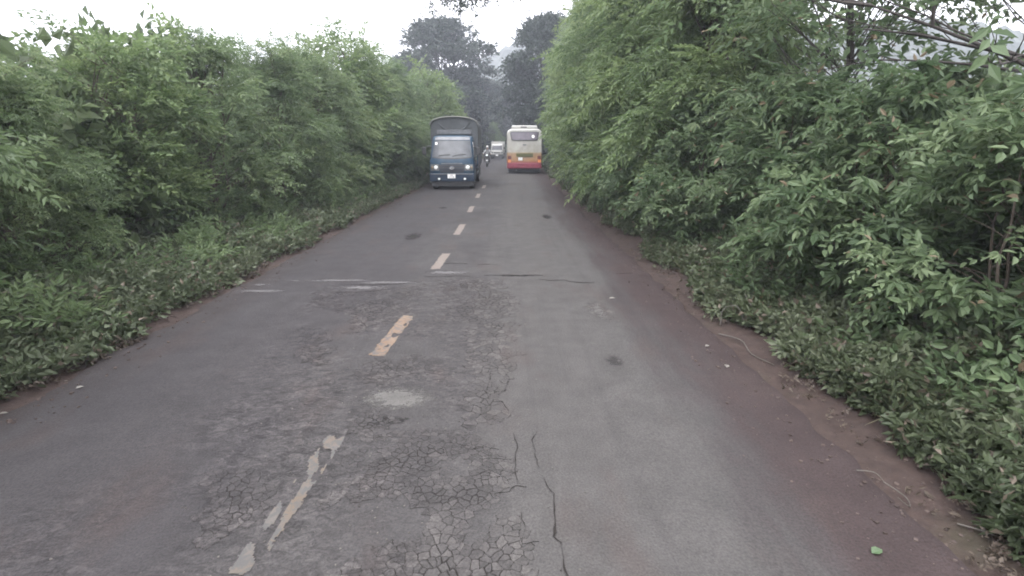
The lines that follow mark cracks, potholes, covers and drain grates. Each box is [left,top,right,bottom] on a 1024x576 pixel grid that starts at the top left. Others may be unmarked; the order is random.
crack [291,263,587,576]
crack [190,466,278,550]
